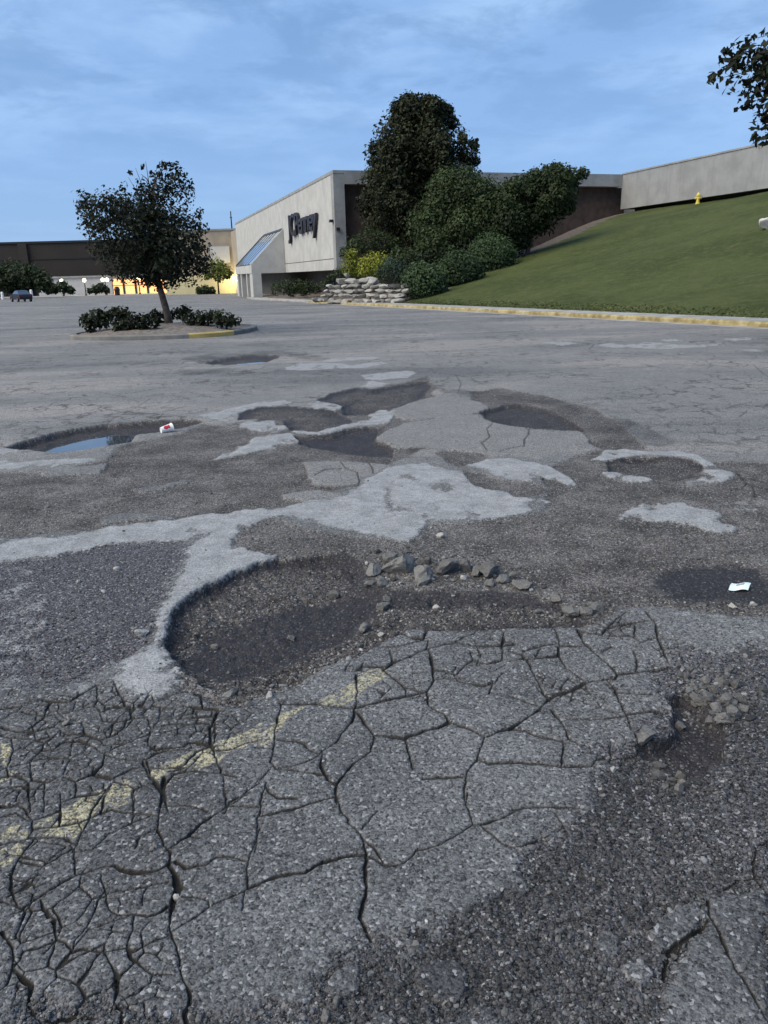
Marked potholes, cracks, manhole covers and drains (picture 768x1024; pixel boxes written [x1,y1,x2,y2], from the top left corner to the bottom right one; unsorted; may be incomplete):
pothole [236,405,354,432]
pothole [161,551,591,697]
pothole [6,418,204,451]
pothole [633,689,734,787]
crack [661,842,768,1022]
crack [726,401,768,417]
pothole [315,380,433,416]
crack [171,611,678,943]
pothole [604,455,705,482]
pothole [478,403,585,433]
pothole [291,425,396,459]
pothole [202,354,282,365]
